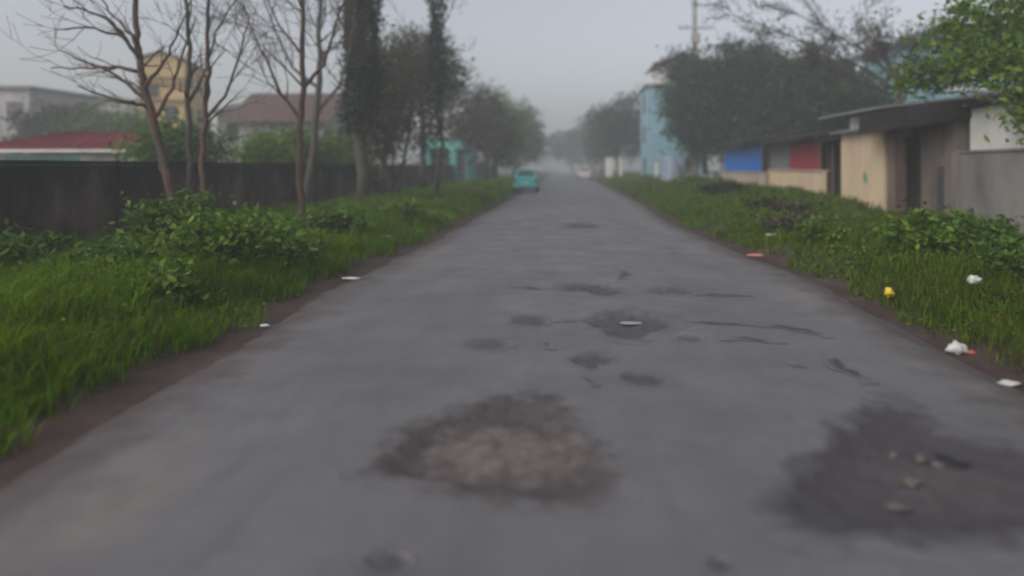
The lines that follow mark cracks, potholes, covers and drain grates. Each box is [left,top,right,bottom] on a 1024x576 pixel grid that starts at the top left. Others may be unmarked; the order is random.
pothole [573,305,695,345]
pothole [735,390,1024,569]
pothole [553,221,611,230]
pothole [356,543,422,576]
pothole [454,336,520,352]
pothole [505,312,554,328]
pothole [540,281,641,299]
crack [684,319,880,384]
pothole [612,369,677,389]
pothole [561,349,621,372]
pothole [338,388,645,518]
